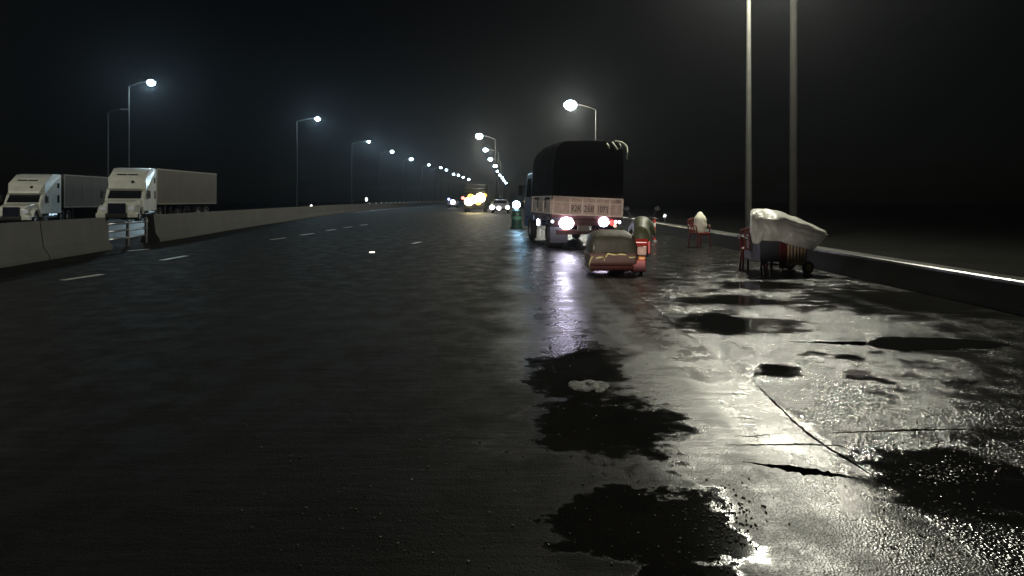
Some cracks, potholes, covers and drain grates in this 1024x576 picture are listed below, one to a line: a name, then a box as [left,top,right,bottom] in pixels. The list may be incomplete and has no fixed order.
crack [734,417,973,479]
